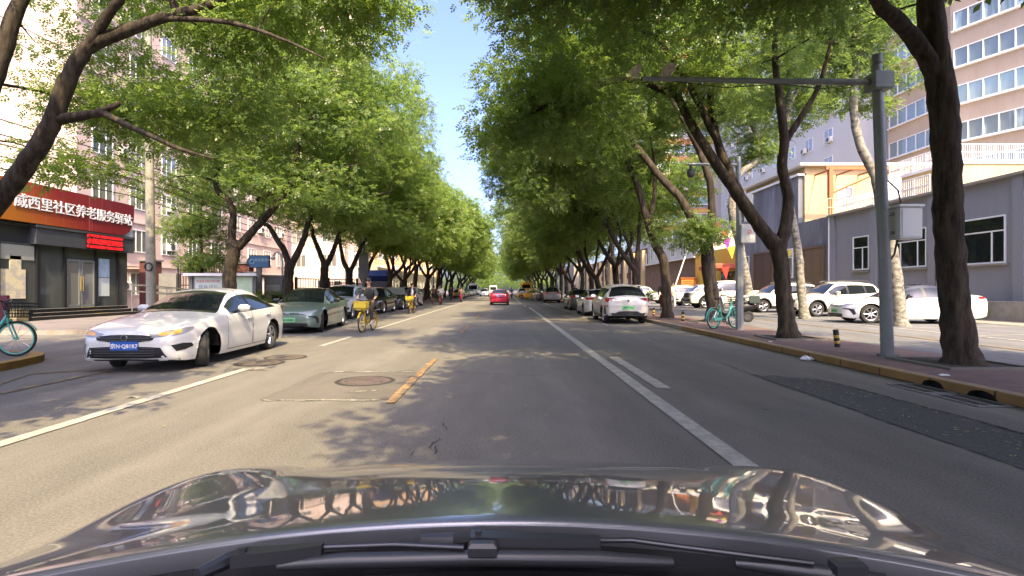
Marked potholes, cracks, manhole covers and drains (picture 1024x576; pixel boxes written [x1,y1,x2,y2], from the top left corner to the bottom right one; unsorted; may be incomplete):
manhole cover [334,376,395,386]
drain grate [886,383,957,394]
drain grate [929,394,1015,407]
